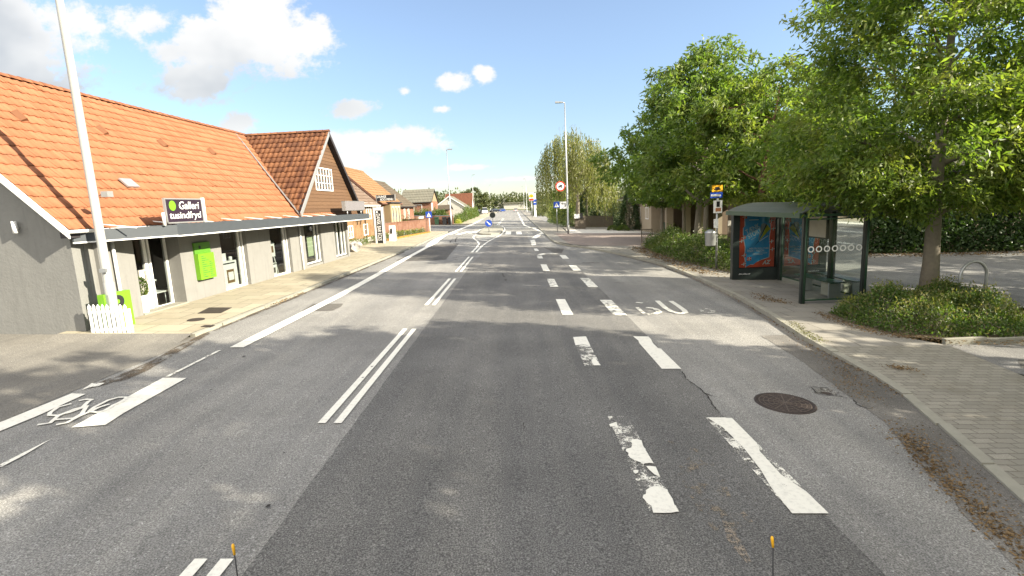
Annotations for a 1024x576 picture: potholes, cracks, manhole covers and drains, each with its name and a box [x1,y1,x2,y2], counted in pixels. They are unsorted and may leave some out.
manhole cover [754,393,817,415]
